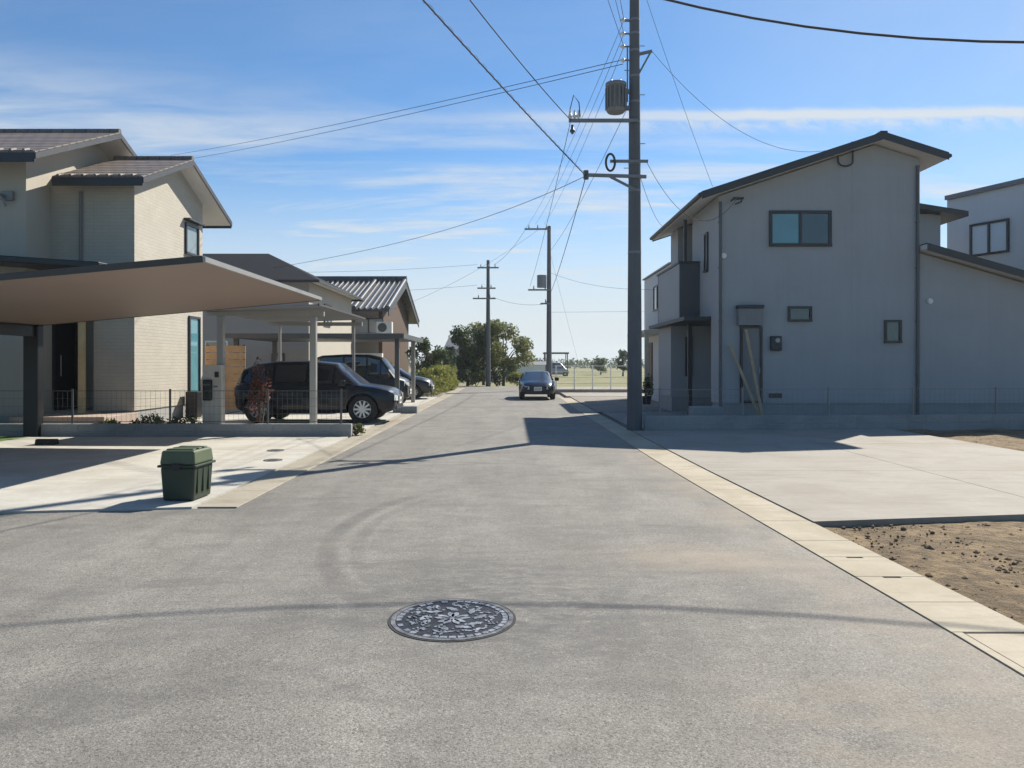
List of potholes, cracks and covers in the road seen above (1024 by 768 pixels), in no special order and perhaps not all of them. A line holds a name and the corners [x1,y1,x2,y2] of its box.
manhole cover [388,599,516,642]
